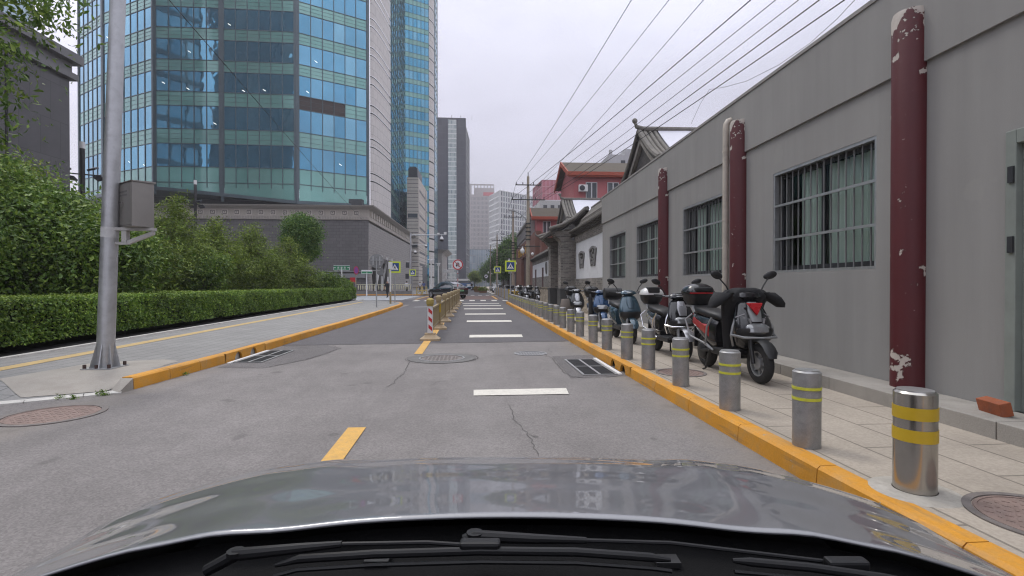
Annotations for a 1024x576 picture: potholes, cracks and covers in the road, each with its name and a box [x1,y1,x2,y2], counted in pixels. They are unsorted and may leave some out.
manhole cover [407,353,476,363]
drain grate [227,350,294,364]
manhole cover [656,368,707,377]
drain grate [564,358,622,375]
manhole cover [961,491,1024,536]
manhole cover [0,404,108,427]
